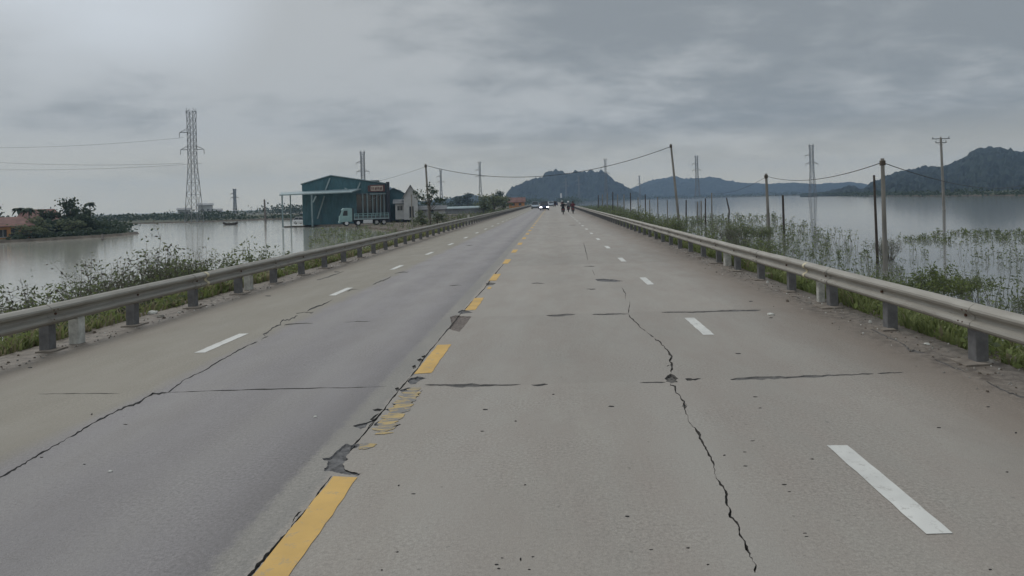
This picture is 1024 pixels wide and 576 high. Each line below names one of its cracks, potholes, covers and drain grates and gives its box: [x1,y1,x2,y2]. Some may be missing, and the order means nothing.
crack [0,302,385,478]
crack [592,288,757,572]
pothole [322,444,360,476]
